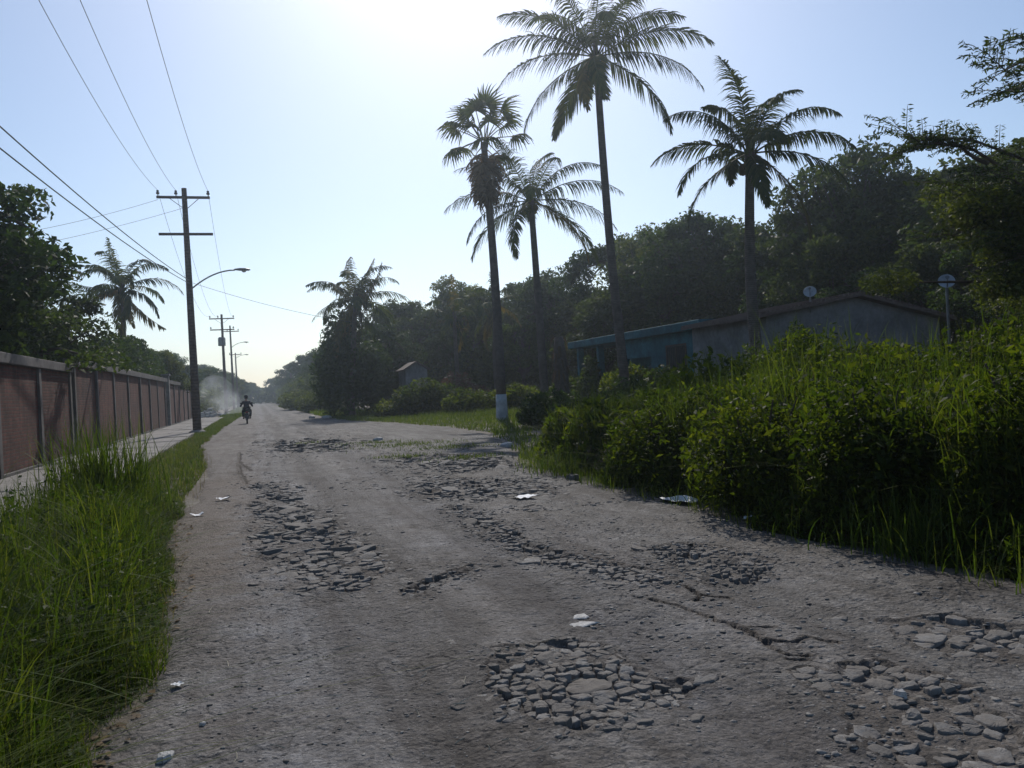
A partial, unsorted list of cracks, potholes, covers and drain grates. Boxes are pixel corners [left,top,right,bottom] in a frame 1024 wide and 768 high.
pothole [247,438,372,457]
pothole [434,503,705,591]
pothole [610,538,807,593]
pothole [828,610,1024,666]
pothole [446,634,732,759]
pothole [785,657,1024,768]
crack [645,581,844,662]
pothole [218,481,414,603]
